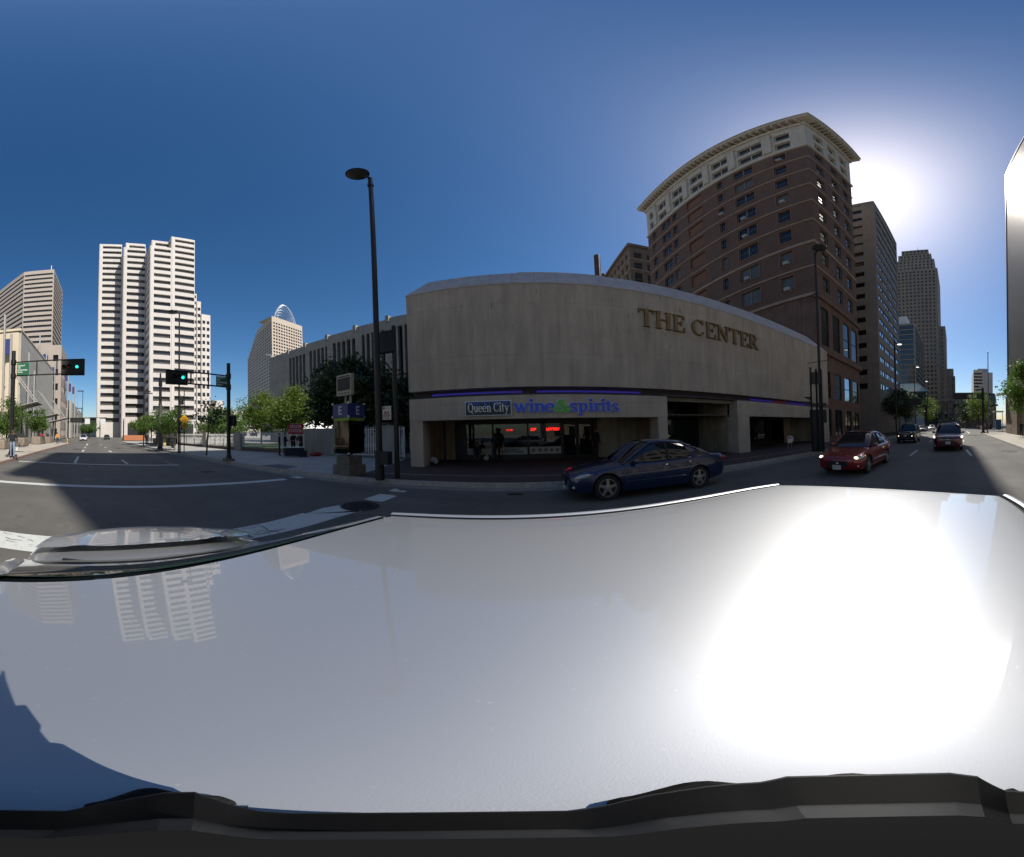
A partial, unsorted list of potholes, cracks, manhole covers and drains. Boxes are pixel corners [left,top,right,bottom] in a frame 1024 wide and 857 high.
manhole cover [342,501,380,511]
